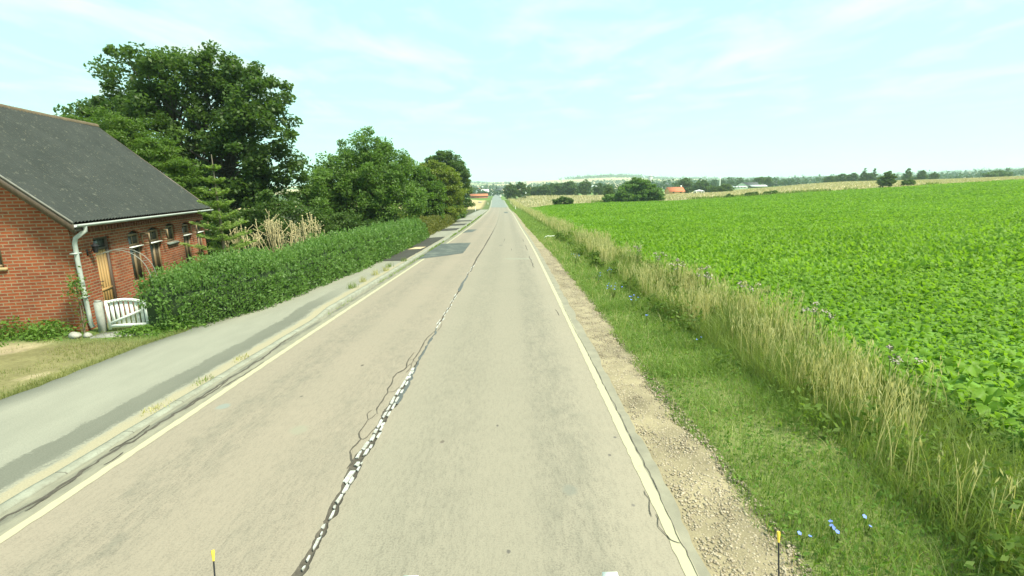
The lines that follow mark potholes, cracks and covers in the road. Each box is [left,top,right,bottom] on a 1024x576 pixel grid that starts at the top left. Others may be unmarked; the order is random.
crack [291,210,534,576]
